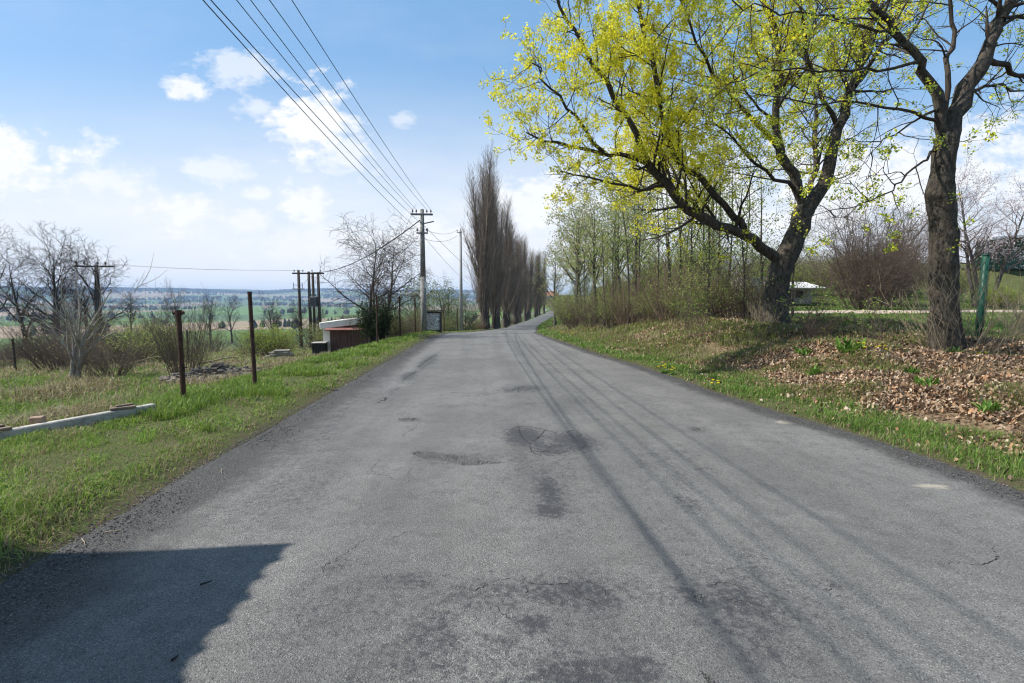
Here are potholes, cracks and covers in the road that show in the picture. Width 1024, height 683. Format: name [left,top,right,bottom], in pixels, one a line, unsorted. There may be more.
crack [476,571,606,620]
